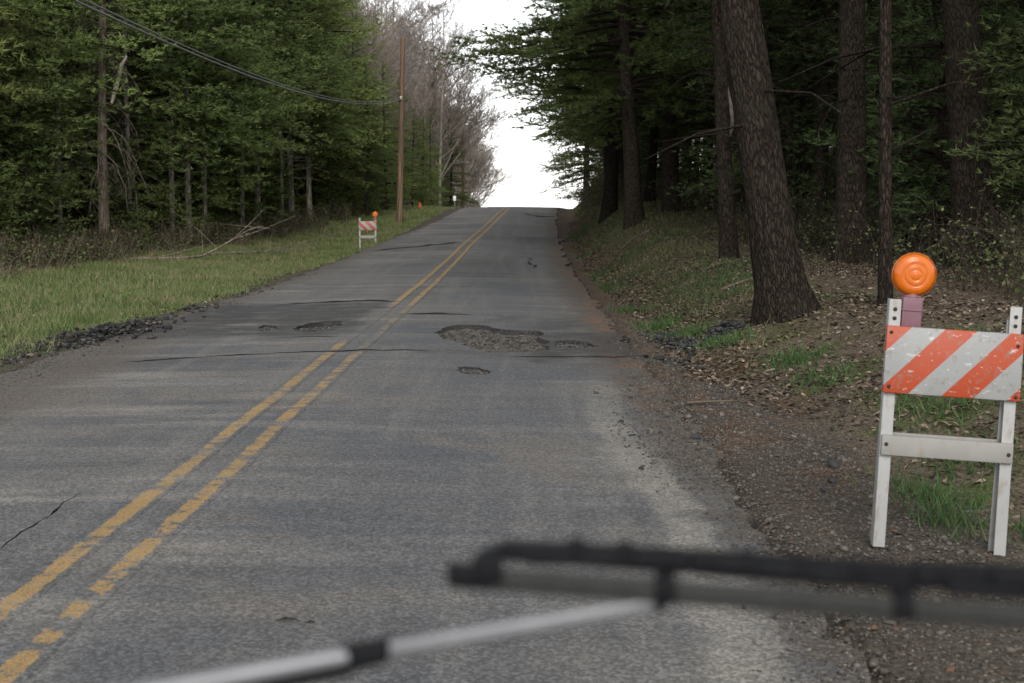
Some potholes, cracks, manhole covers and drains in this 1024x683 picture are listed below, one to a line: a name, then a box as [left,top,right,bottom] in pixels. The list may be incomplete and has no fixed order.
crack [0,492,81,549]
crack [374,242,460,251]
pothole [292,321,343,332]
pothole [456,366,492,375]
pothole [433,325,550,352]
crack [120,336,427,363]
pothole [554,340,598,349]
